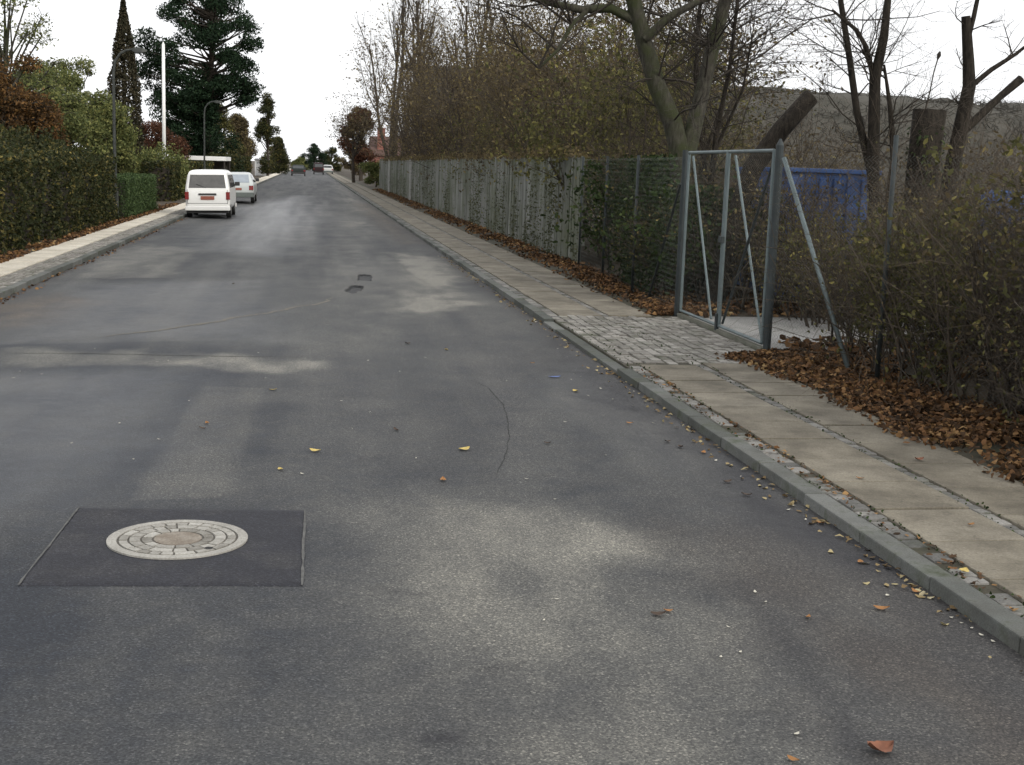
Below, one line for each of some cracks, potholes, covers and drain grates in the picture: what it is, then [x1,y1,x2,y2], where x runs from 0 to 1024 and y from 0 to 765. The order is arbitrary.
pothole [350,273,380,282]
manhole cover [106,520,248,560]
crack [479,383,510,482]
pothole [338,284,372,295]
